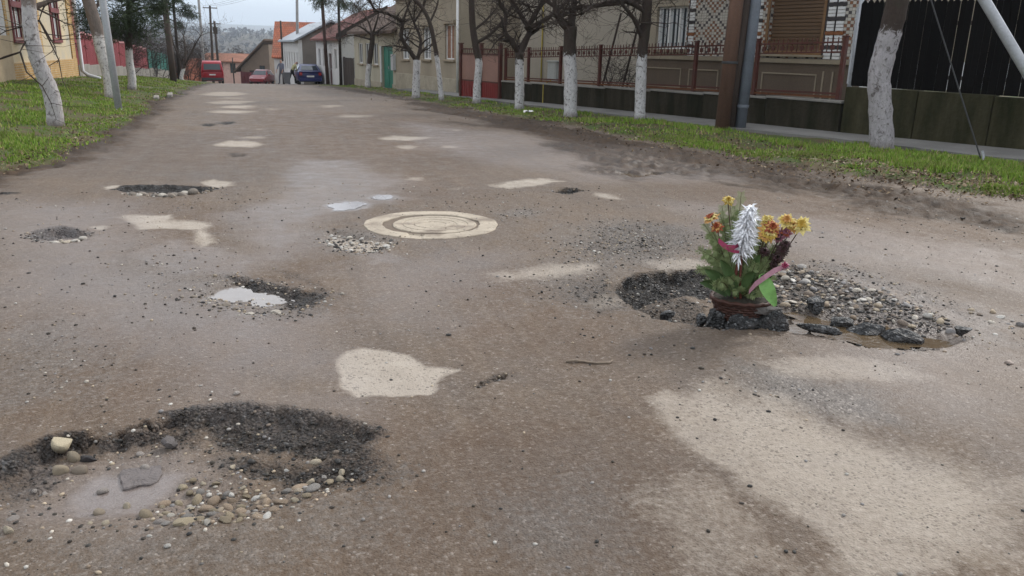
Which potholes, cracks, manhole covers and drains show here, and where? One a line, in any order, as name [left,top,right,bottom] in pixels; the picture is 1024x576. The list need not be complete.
pothole [0,402,387,541]
pothole [603,262,977,352]
manhole cover [363,211,498,239]
pothole [109,184,218,197]
pothole [181,276,332,315]
pothole [23,225,104,244]
